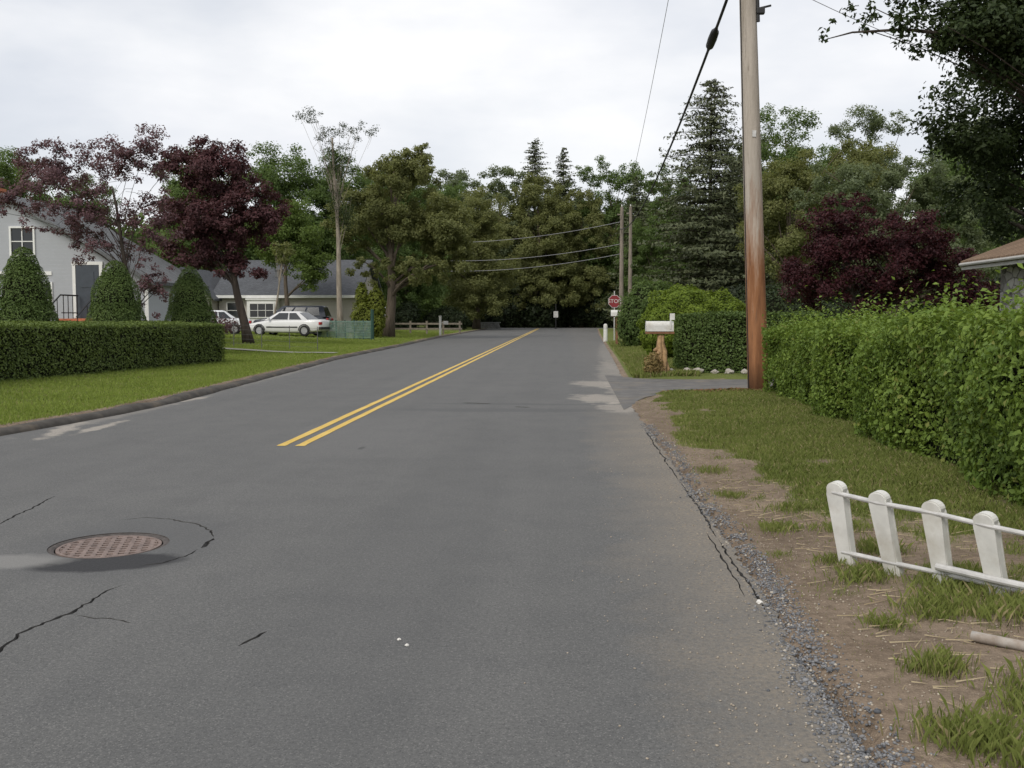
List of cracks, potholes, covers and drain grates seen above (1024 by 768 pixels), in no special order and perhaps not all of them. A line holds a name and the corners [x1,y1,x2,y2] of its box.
crack [0,587,130,652]
crack [239,631,267,646]
crack [645,430,768,614]
crack [0,498,51,524]
manhole cover [47,532,170,559]
